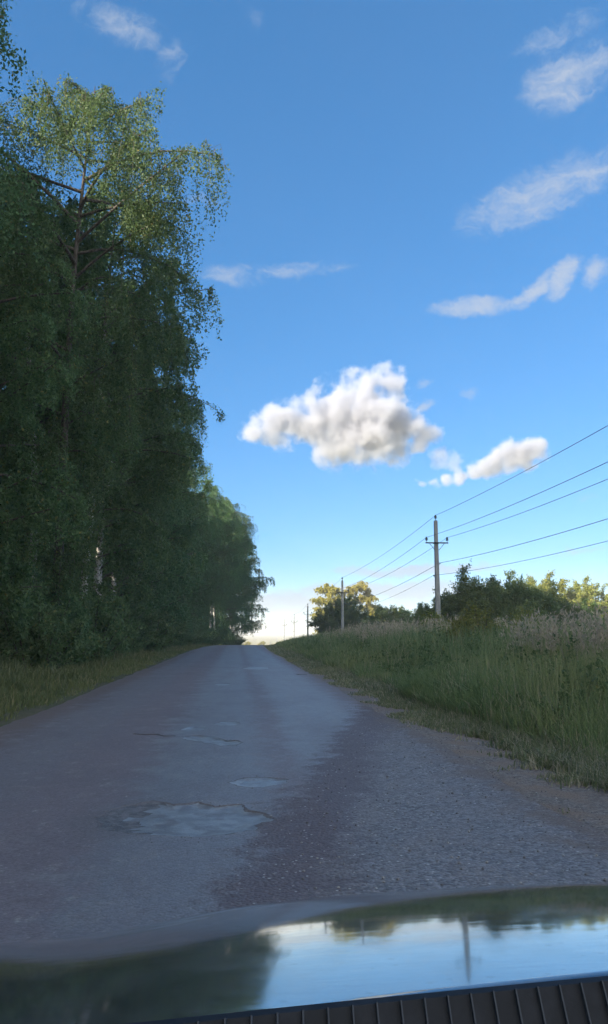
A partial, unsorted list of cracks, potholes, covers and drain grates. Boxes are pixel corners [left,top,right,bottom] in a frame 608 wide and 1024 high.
pothole [227,777,289,787]
pothole [95,800,277,837]
